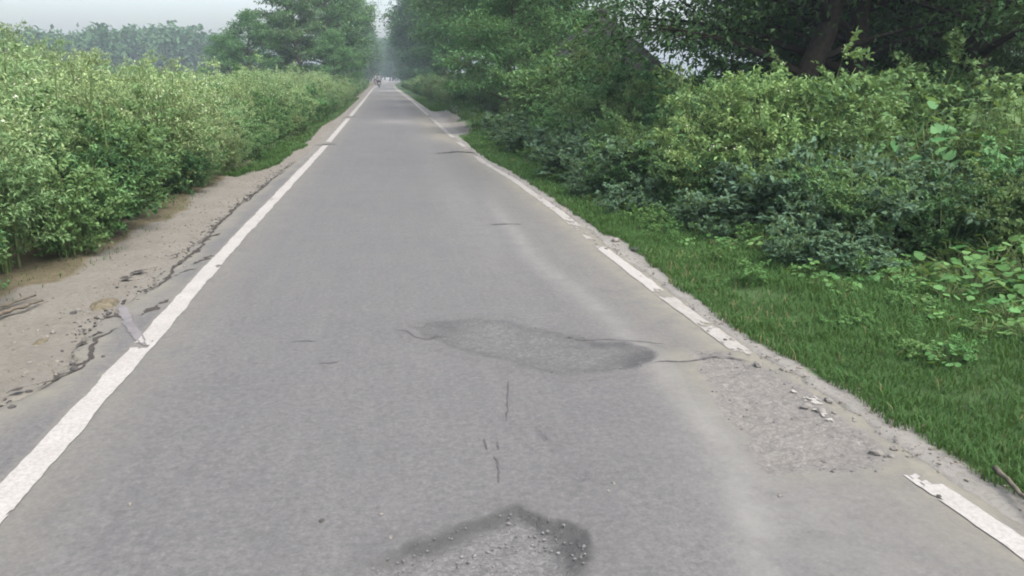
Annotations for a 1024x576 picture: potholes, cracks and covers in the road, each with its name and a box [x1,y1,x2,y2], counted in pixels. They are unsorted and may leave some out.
crack [483,438,500,482]
crack [563,336,746,362]
pothole [335,491,622,576]
